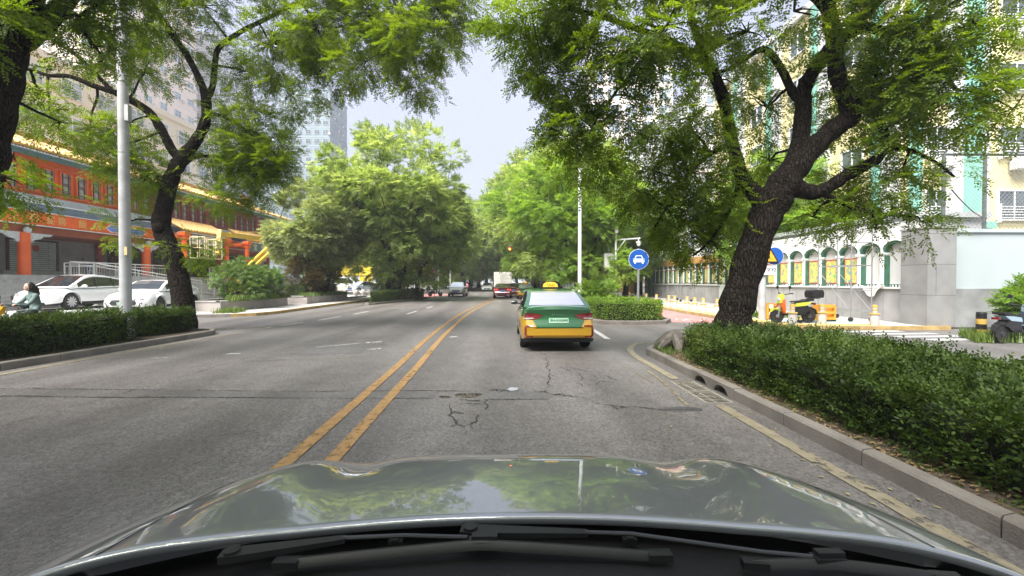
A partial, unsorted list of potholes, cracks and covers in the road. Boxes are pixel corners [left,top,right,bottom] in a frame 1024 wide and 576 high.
drain grate [687,391,734,403]
crack [0,353,677,428]
